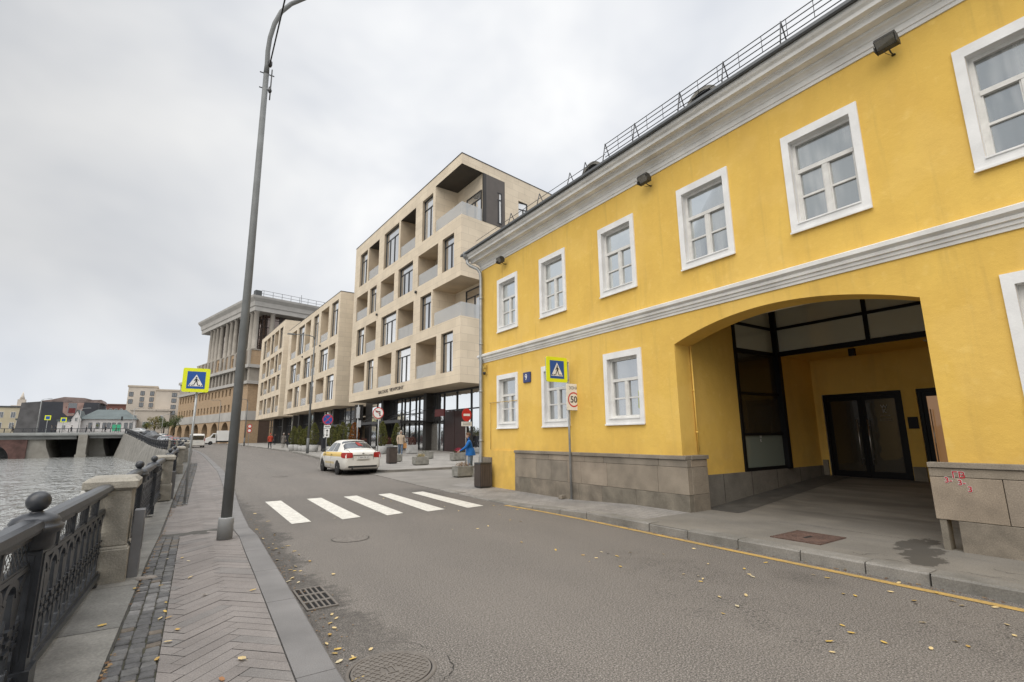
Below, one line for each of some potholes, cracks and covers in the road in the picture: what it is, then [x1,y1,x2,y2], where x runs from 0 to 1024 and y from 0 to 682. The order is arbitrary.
drain grate [292,585,339,611]
manhole cover [344,650,437,682]
manhole cover [770,530,846,545]
